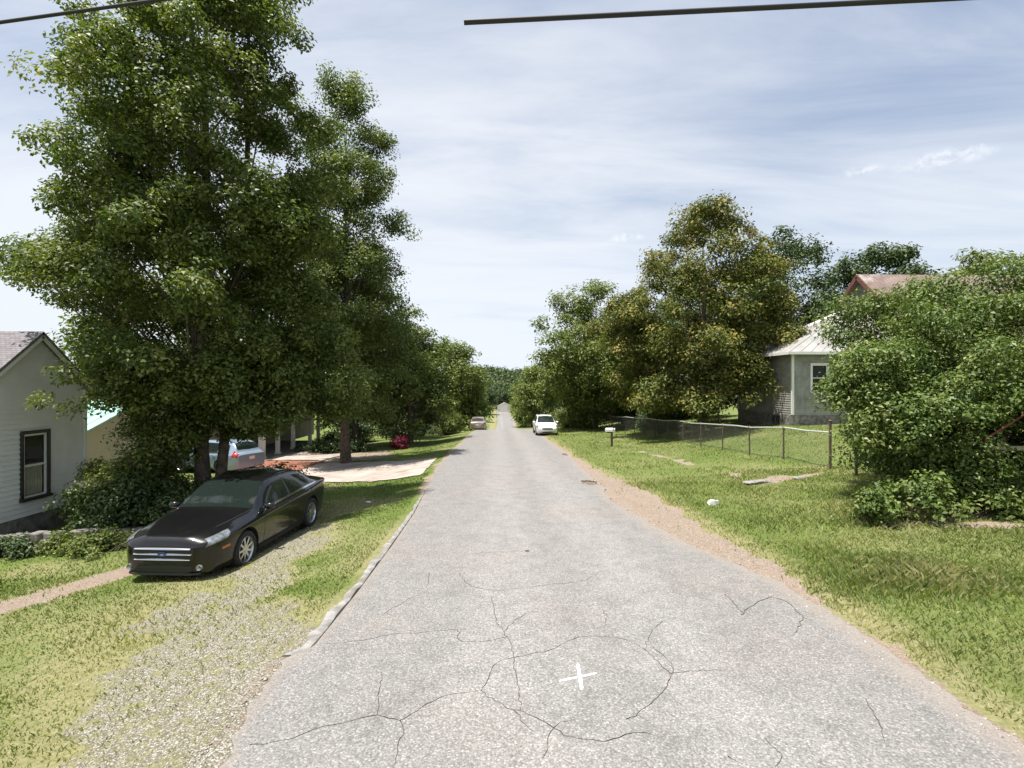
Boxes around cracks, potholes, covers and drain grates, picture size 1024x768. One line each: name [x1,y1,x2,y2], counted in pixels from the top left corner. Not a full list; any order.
crack [724,594,810,633]
crack [250,597,718,766]
